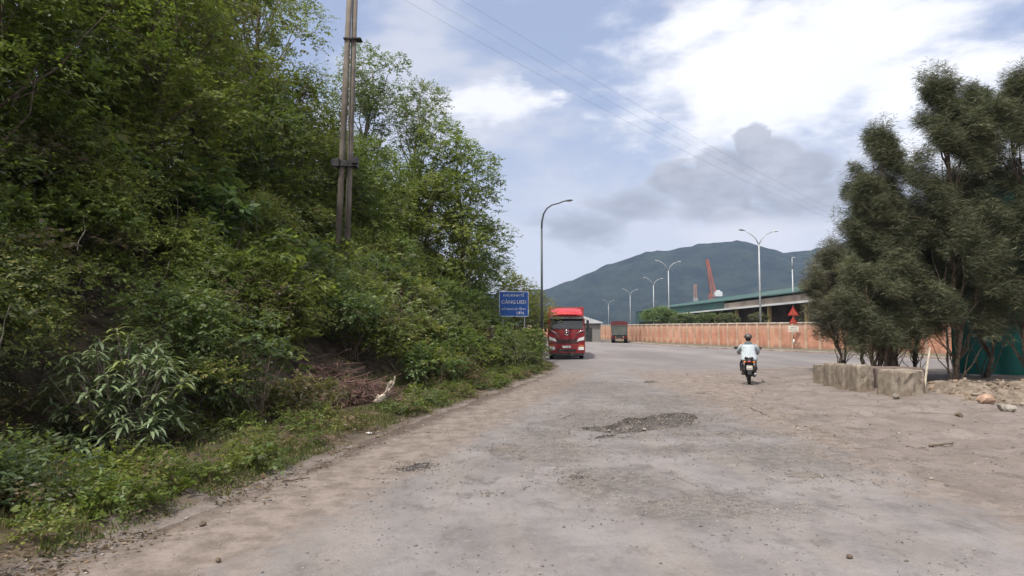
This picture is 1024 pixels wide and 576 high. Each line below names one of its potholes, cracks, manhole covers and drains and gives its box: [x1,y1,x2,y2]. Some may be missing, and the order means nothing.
pothole [576,412,698,434]
crack [744,405,773,418]
pothole [397,462,433,472]
